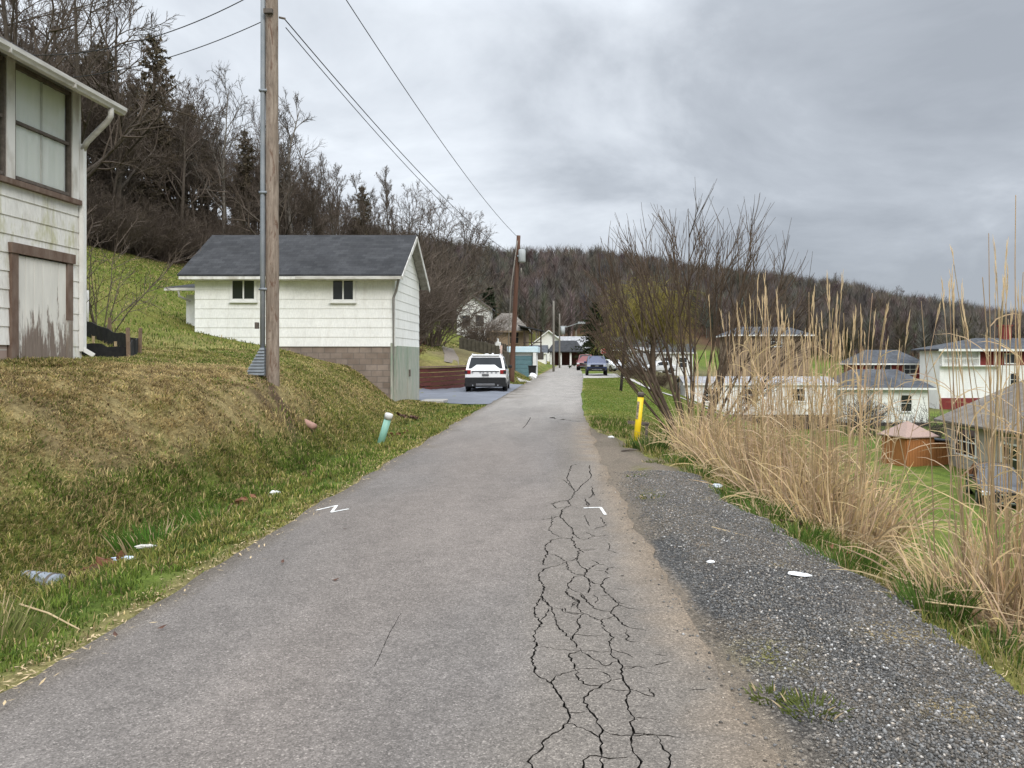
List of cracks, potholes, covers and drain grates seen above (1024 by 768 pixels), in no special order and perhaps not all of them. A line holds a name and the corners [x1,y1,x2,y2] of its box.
crack [526,464,707,768]
